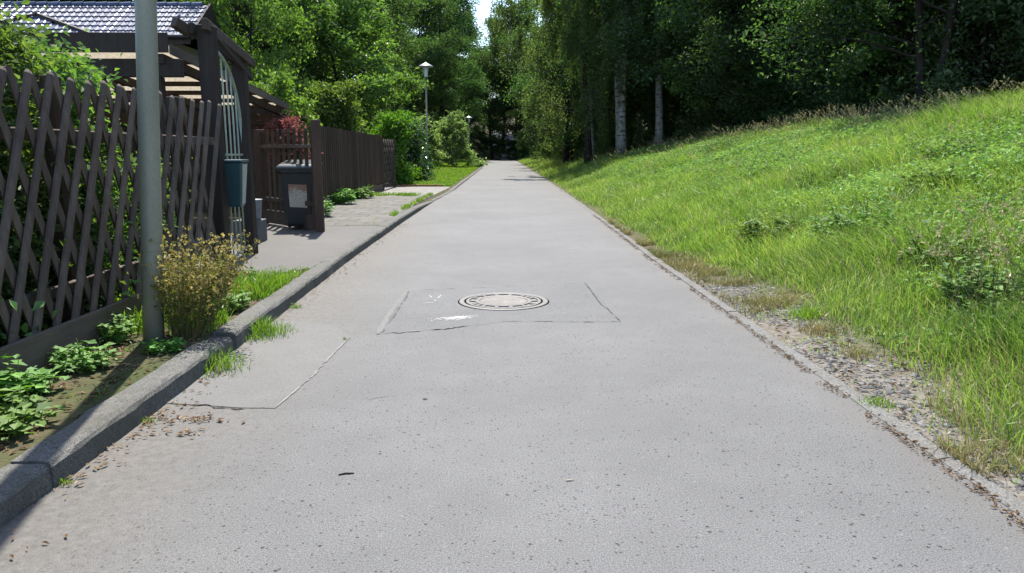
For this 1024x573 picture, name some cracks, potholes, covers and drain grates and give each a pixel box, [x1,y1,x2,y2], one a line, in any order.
manhole cover [459,292,548,311]
